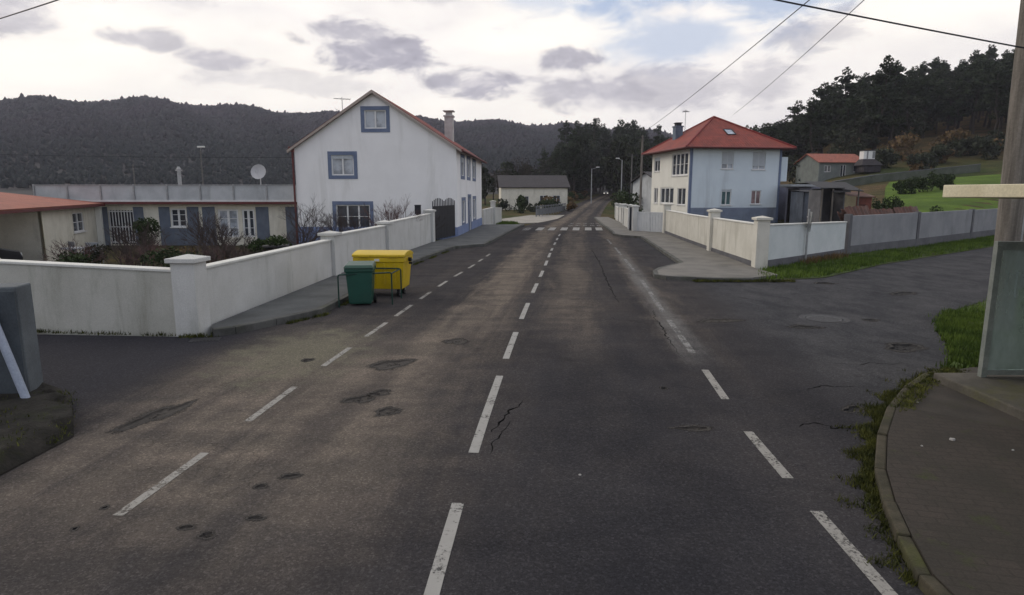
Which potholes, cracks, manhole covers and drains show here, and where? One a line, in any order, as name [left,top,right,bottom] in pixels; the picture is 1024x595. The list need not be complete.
pothole [368,358,418,371]
pothole [668,424,713,432]
pothole [105,398,200,434]
crack [490,403,521,454]
pothole [196,530,218,540]
pothole [885,342,928,353]
pothole [374,406,404,417]
manhole cover [799,314,850,323]
